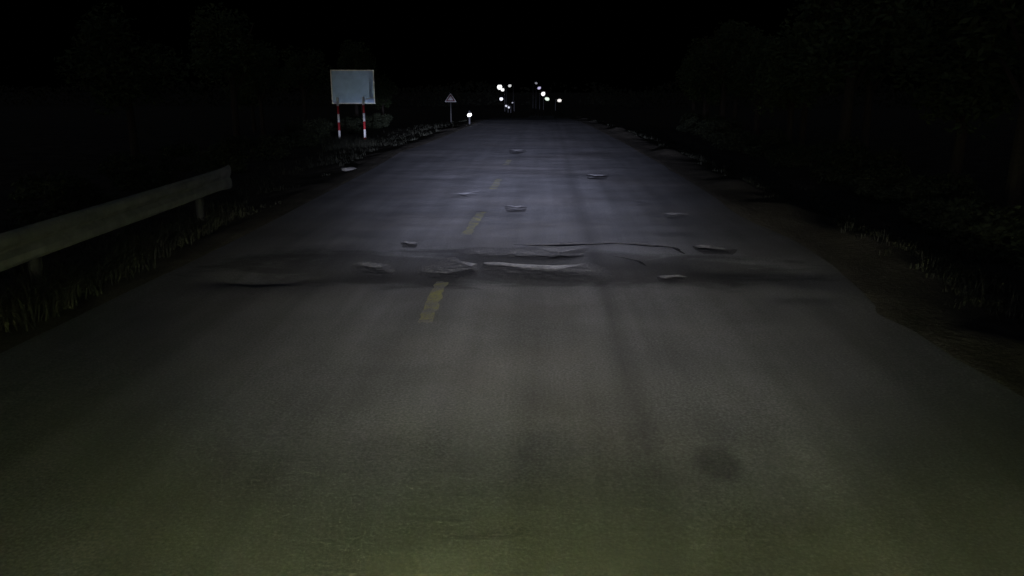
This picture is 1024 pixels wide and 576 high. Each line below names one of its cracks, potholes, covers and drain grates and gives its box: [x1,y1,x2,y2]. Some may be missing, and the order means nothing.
pothole [662,212,689,220]
pothole [693,245,738,255]
pothole [351,261,397,279]
pothole [415,257,480,280]
pothole [656,274,688,284]
pothole [478,262,615,283]
crack [514,242,685,266]
